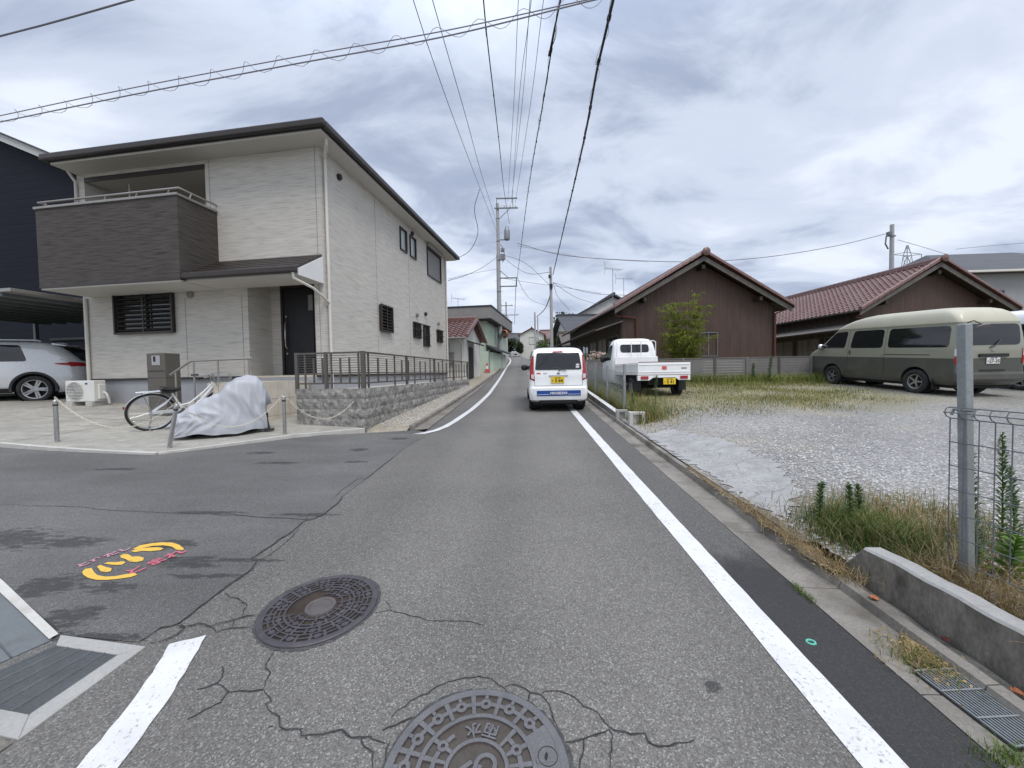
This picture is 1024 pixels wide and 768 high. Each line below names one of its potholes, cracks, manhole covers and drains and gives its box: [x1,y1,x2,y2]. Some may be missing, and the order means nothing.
crack [375,601,521,627]
manhole cover [251,574,381,652]
drain grate [0,635,145,741]
crack [187,652,694,768]
drain grate [913,668,1024,752]
manhole cover [381,688,575,768]
crack [0,454,397,643]
